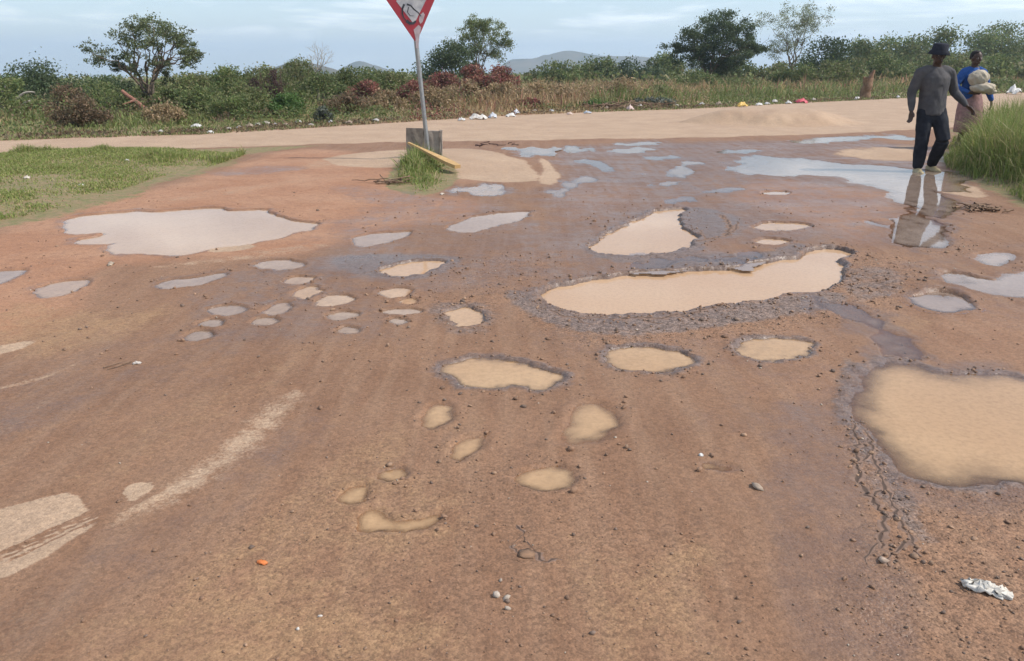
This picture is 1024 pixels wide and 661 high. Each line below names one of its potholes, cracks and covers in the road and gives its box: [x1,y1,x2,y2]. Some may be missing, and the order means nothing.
pothole [520,243,863,317]
crack [848,419,922,566]
pothole [150,268,241,290]
pothole [539,393,643,454]
crack [509,525,562,563]
pothole [446,429,499,464]
pothole [53,205,329,258]
pothole [25,276,99,299]
pothole [726,333,824,364]
pothole [427,352,580,394]
pothole [348,501,453,535]
pothole [413,398,466,432]
